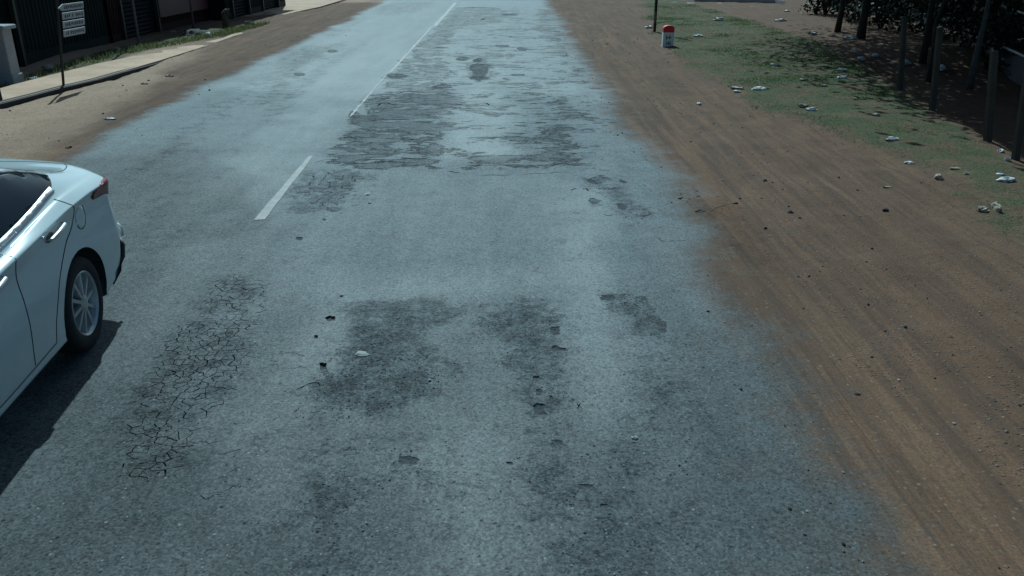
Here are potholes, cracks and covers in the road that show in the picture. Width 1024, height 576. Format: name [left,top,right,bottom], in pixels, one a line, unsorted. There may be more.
crack [296,82,465,205]
pothole [533,403,547,415]
pothole [398,455,419,465]
crack [117,274,265,500]
